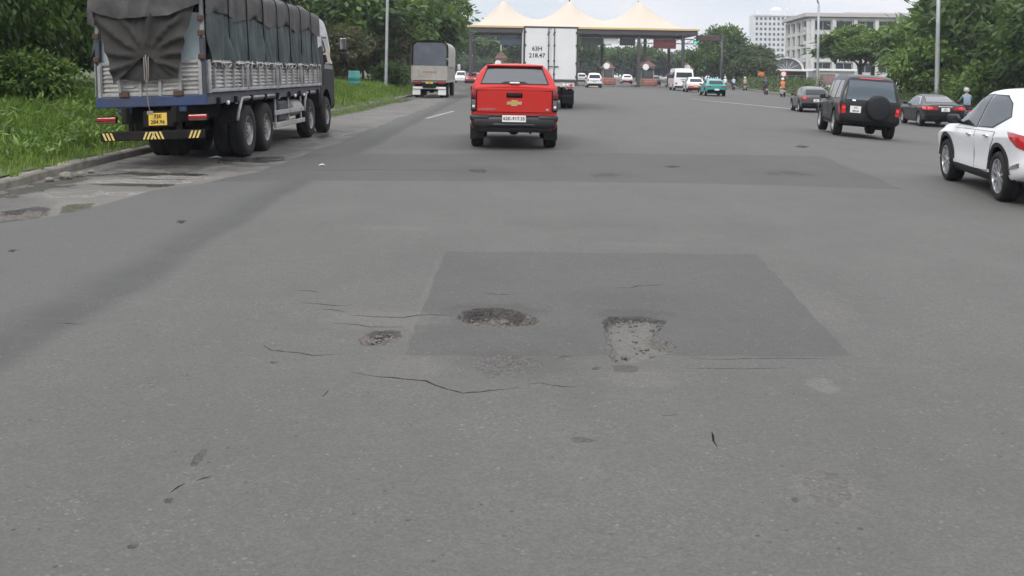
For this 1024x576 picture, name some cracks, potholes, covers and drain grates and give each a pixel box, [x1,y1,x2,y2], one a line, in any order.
pothole [358,330,402,346]
crack [295,290,419,327]
pothole [457,307,540,328]
pothole [601,316,677,364]
crack [353,372,512,393]
